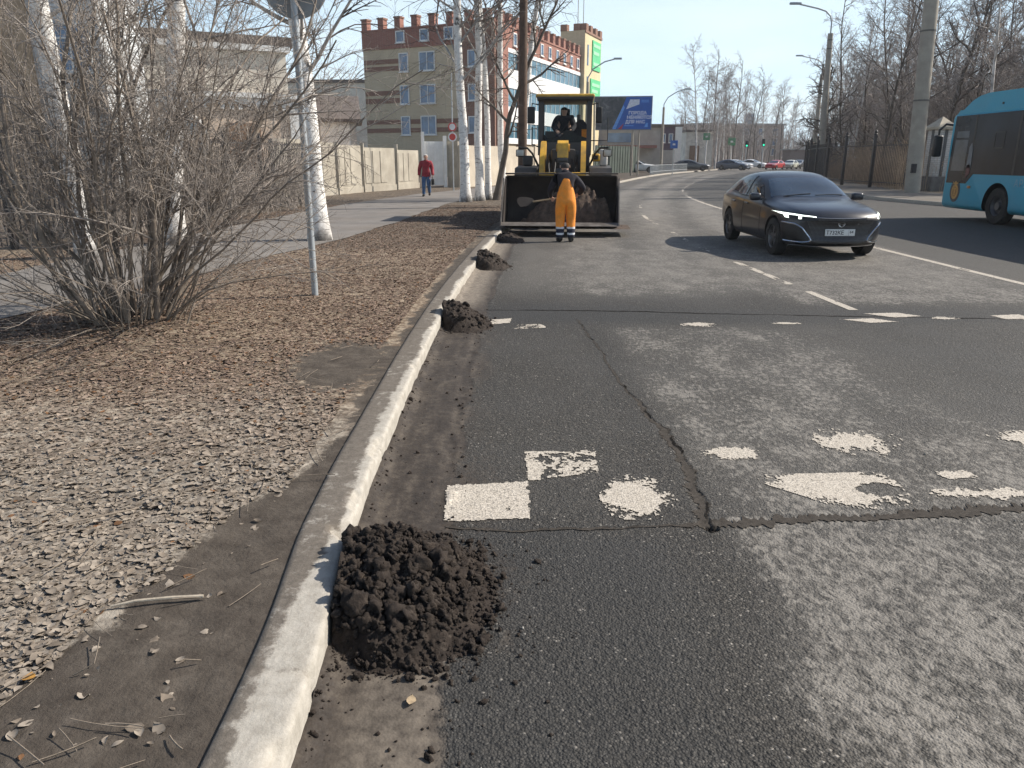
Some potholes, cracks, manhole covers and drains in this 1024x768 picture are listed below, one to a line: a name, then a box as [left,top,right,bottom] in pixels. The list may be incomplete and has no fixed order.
crack [445,309,1024,532]
